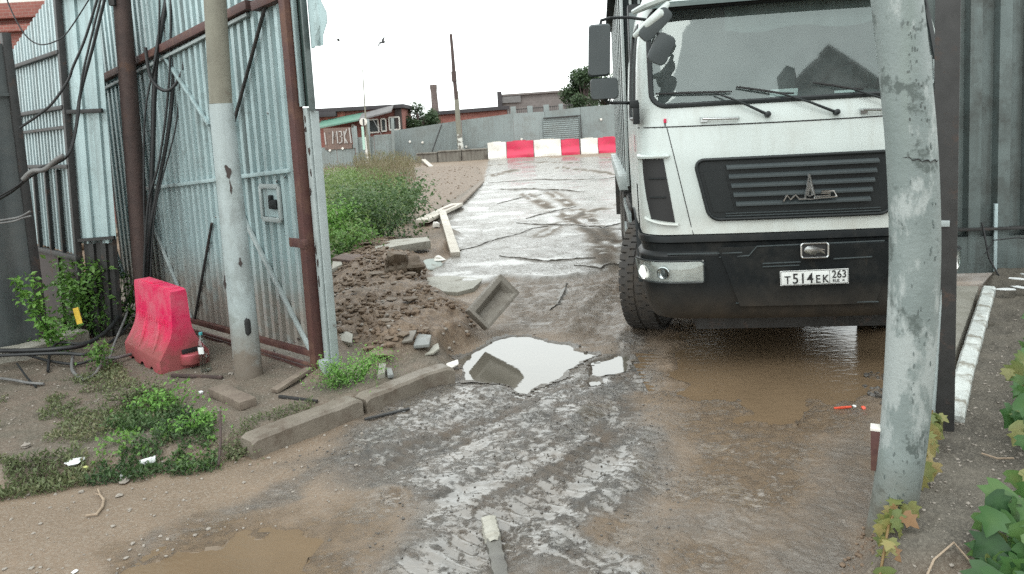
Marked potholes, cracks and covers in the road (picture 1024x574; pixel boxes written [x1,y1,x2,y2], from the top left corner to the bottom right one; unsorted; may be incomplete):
pothole [584,352,637,386]
pothole [448,334,601,396]
